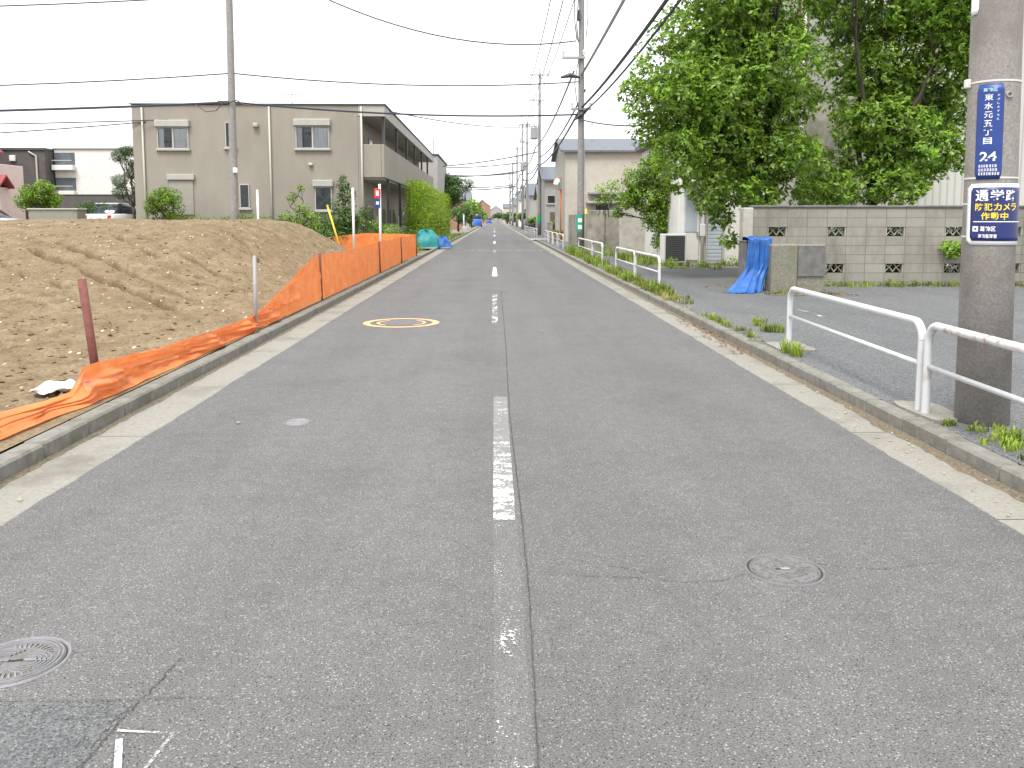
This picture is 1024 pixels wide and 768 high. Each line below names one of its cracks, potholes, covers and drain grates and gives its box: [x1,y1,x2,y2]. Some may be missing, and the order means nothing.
manhole cover [743,553,827,587]
crack [0,656,216,768]
manhole cover [0,636,73,688]
crack [550,565,747,583]
manhole cover [283,418,313,426]
